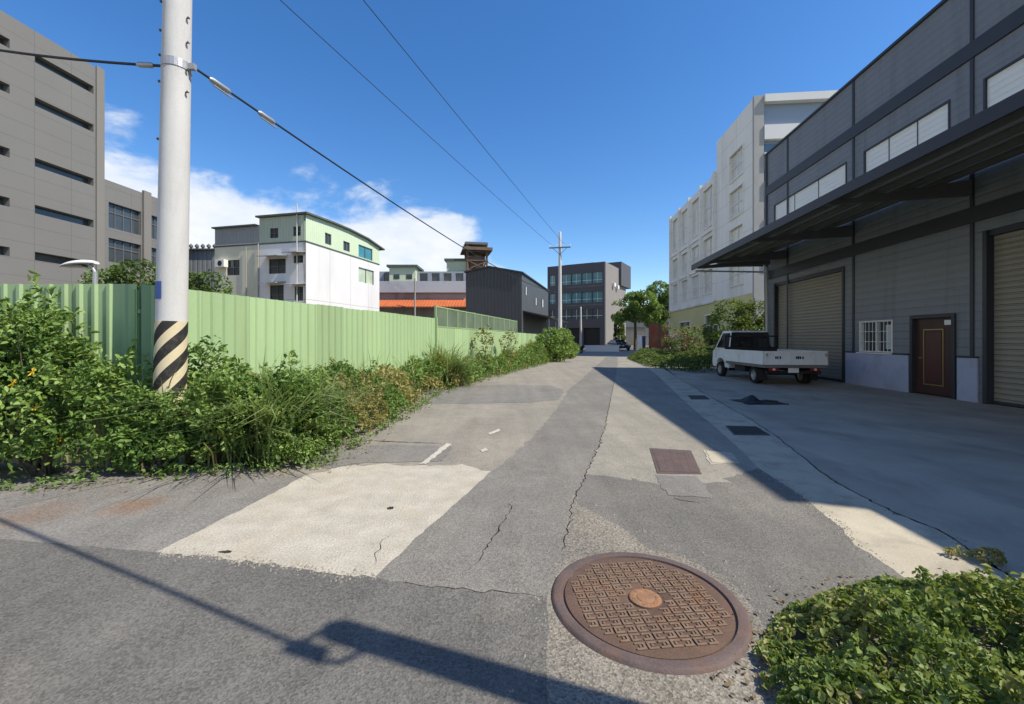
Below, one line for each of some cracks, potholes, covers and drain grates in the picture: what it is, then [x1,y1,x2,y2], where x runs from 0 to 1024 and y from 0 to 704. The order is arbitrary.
crack [462,502,512,579]
manhole cover [551,552,753,675]
drain grate [726,426,770,436]
manhole cover [650,448,701,474]
crack [562,379,615,549]
